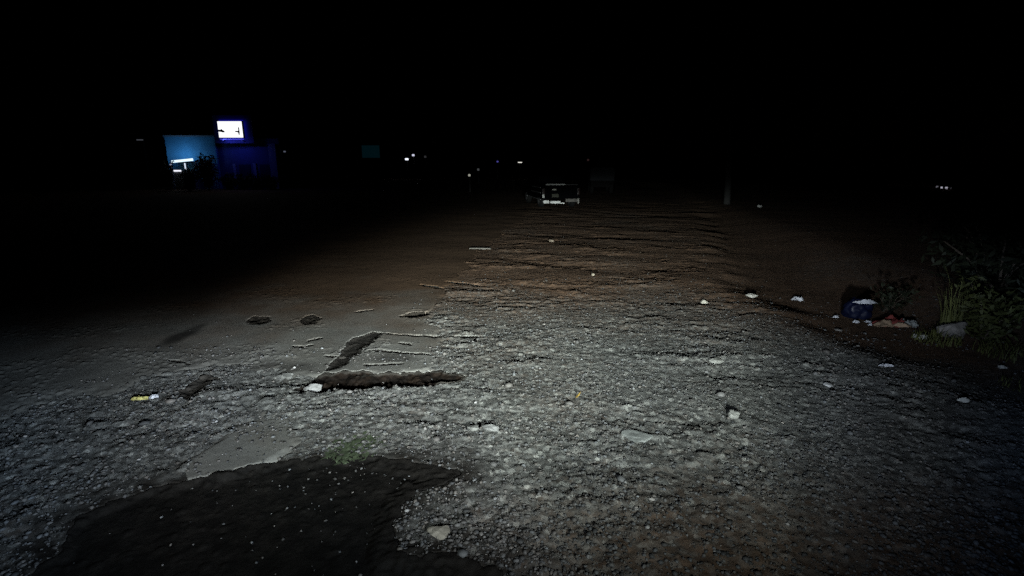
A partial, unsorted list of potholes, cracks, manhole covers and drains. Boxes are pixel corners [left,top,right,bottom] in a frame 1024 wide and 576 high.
pothole [326,332,383,371]
pothole [301,315,321,325]
pothole [178,375,220,399]
pothole [294,370,466,393]
pothole [31,455,503,576]
pothole [246,316,271,324]
